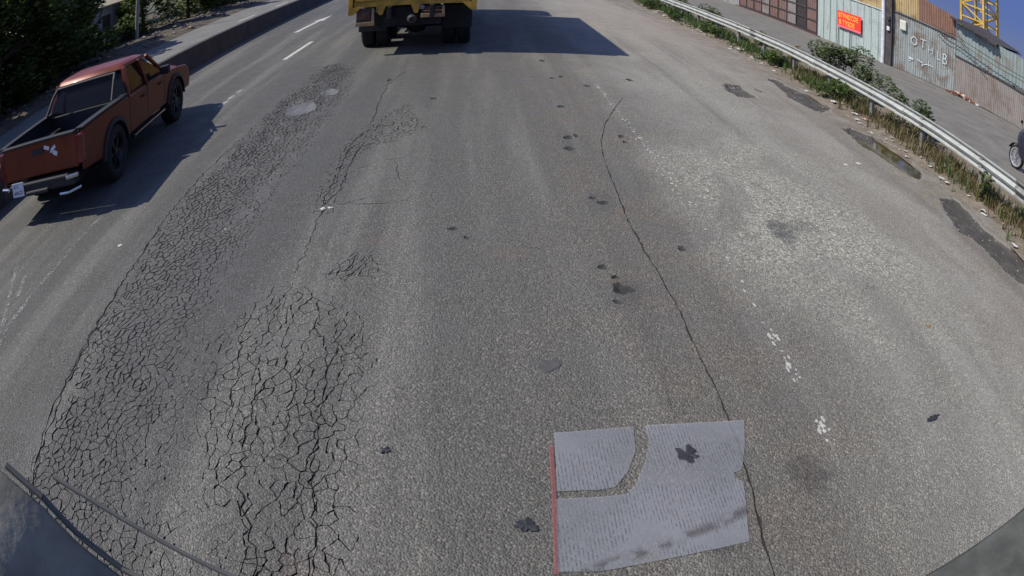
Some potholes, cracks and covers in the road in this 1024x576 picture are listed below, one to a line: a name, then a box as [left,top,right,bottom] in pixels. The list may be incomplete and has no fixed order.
crack [190,283,378,576]
crack [601,98,775,576]
pothole [841,127,925,180]
crack [295,71,427,272]
pothole [612,282,637,295]
